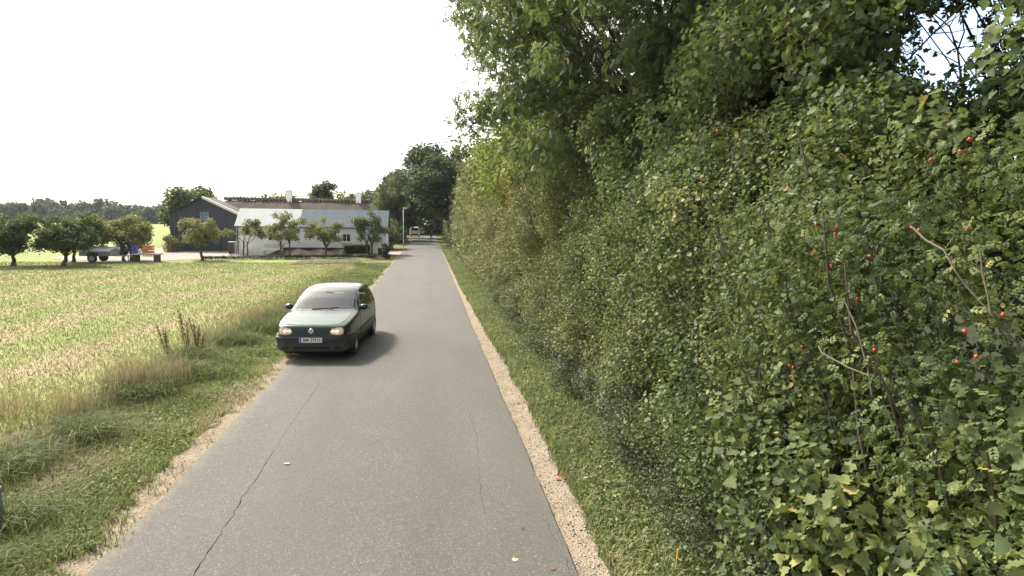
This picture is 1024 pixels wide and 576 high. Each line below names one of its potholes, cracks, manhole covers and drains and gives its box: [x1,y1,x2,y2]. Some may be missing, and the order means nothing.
crack [194,384,319,575]
